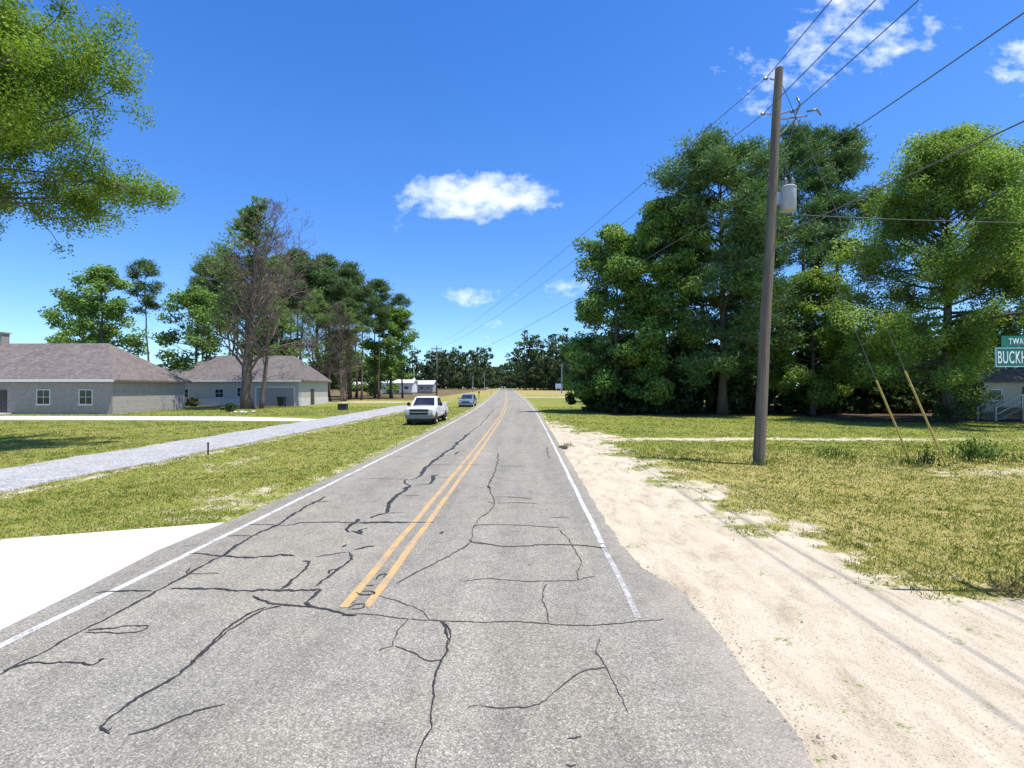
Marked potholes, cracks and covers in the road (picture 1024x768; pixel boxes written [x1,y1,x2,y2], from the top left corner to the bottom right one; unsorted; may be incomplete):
crack [189,544,372,558]
crack [378,453,604,768]
crack [232,521,417,536]
